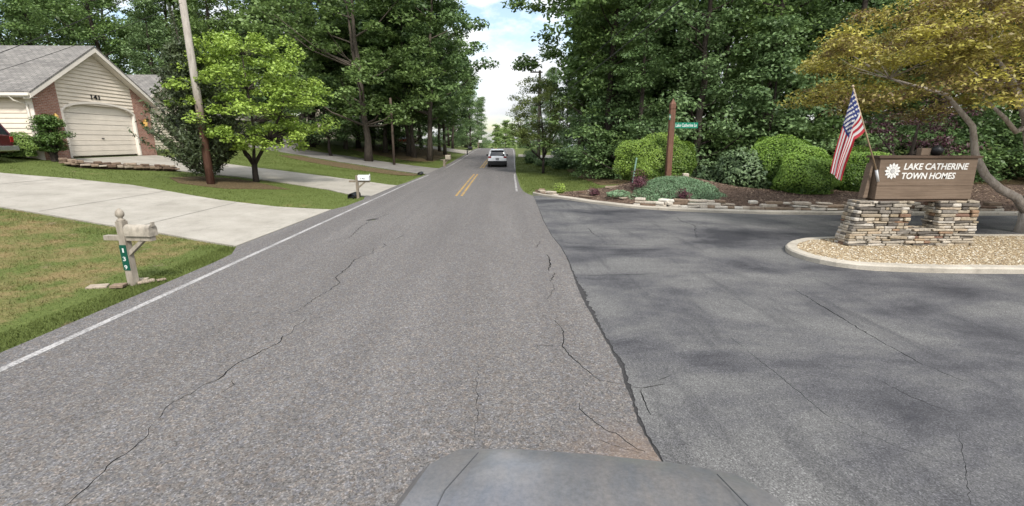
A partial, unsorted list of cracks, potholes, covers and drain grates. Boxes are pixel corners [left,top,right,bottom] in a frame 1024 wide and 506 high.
crack [636,374,674,415]
crack [540,320,619,384]
crack [579,402,643,453]
crack [65,236,401,506]
